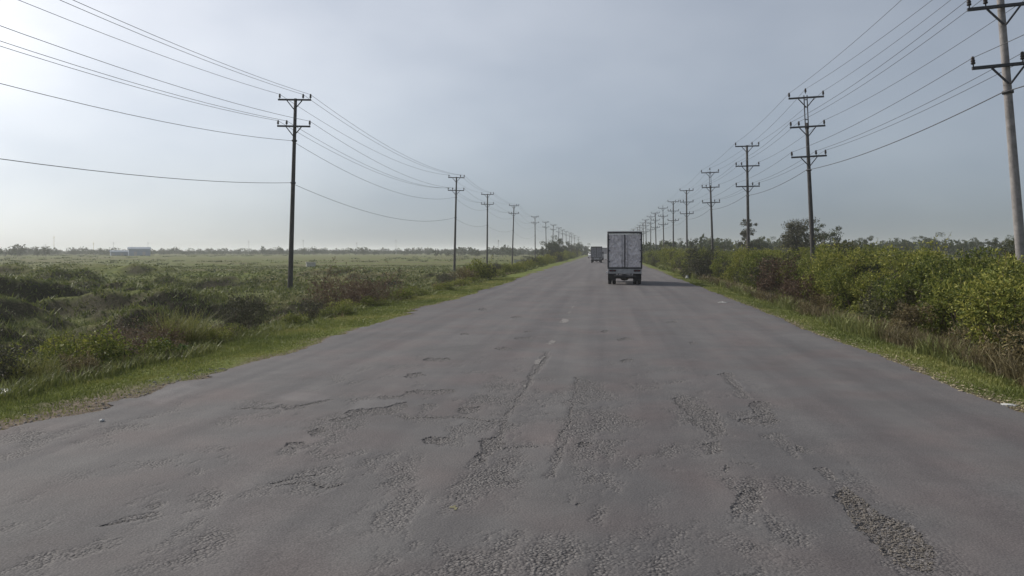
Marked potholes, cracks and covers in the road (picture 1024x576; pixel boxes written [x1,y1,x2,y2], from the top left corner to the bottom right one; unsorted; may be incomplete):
pothole [343,402,409,417]
pothole [746,401,781,425]
pothole [283,441,306,449]
crack [398,352,625,478]
pothole [669,397,727,437]
crack [241,399,331,410]
pothole [729,487,767,514]
pothole [421,436,452,445]
pothole [831,490,939,574]
